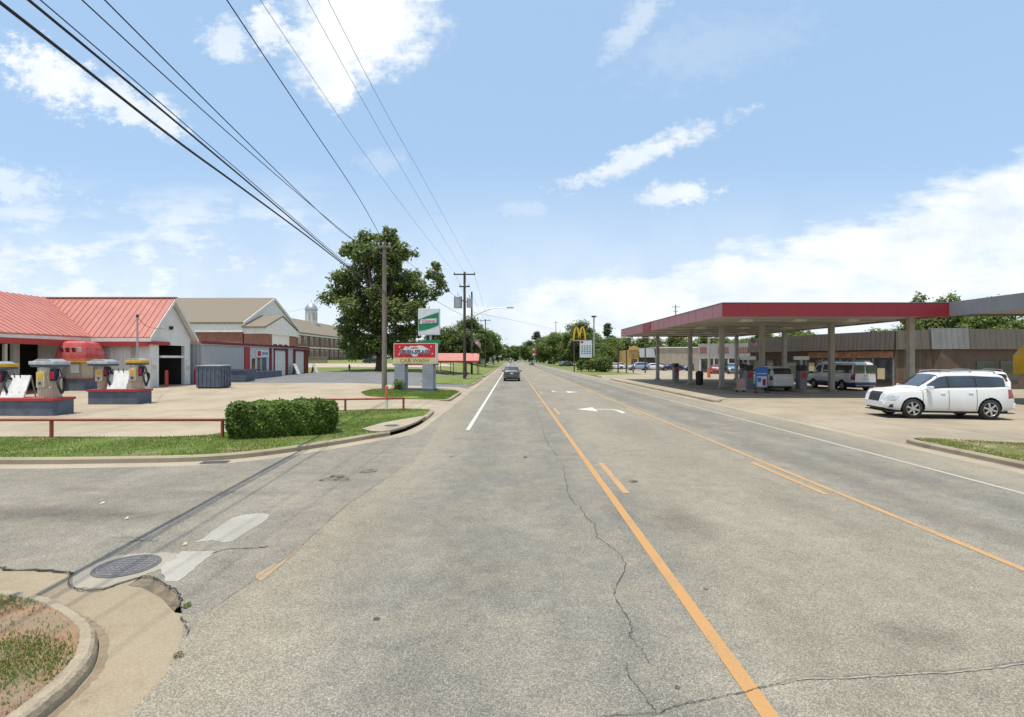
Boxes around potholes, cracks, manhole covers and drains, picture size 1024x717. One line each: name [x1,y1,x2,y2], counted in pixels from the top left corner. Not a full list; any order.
manhole cover [90,554,162,578]
crack [559,459,1024,717]
pothole [128,578,180,611]
